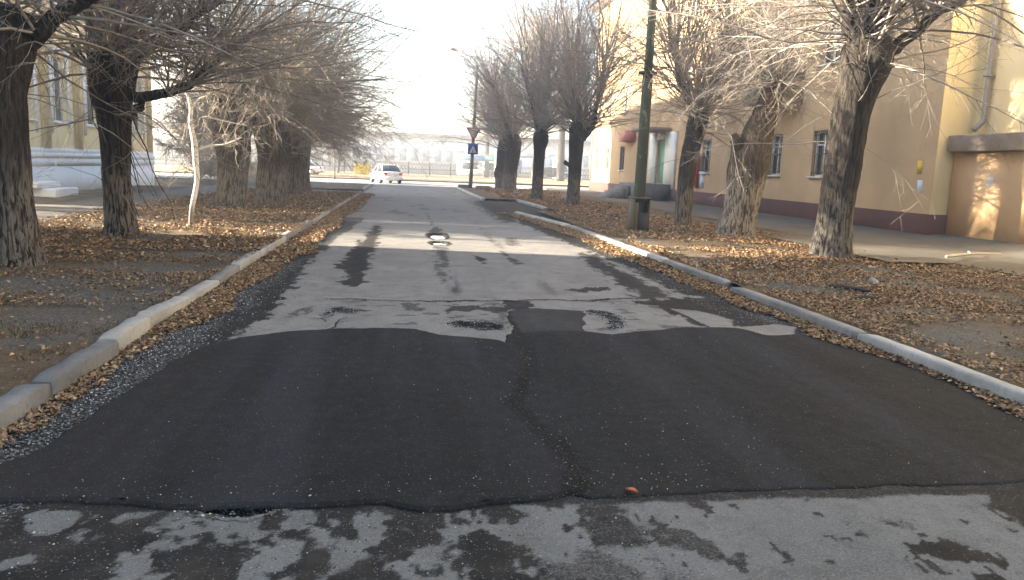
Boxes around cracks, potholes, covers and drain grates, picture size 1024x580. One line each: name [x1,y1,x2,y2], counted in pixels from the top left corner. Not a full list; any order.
pothole [426,232,448,240]
pothole [444,320,510,331]
pothole [583,309,626,330]
pothole [320,306,369,316]
crack [310,297,677,329]
